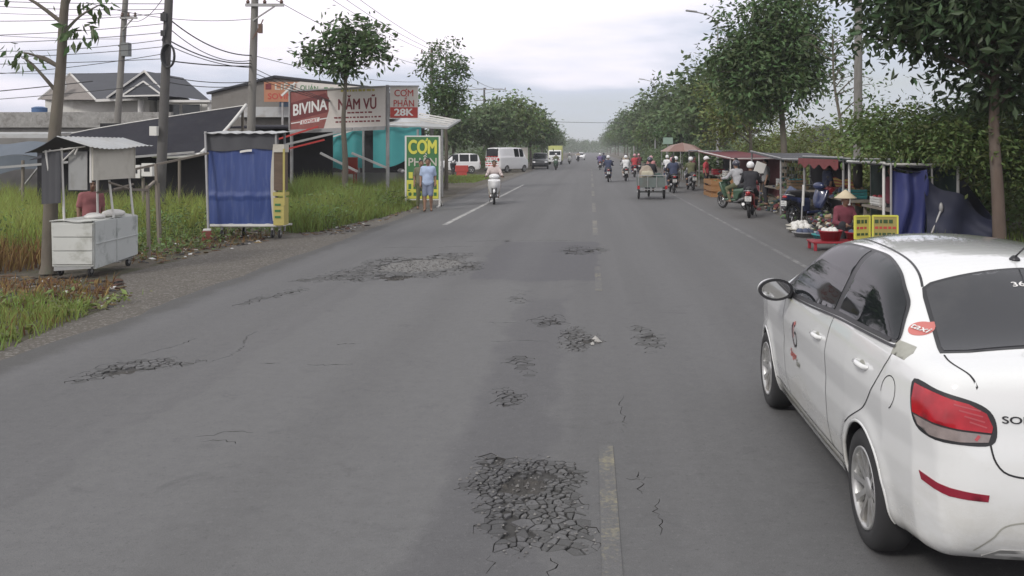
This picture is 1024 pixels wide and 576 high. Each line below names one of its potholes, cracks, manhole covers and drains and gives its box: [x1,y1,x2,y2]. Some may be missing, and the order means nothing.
crack [232,239,609,307]
crack [626,473,663,535]
pothole [497,478,547,497]
crack [61,332,255,386]
crack [454,453,601,576]
pothole [380,259,461,273]
